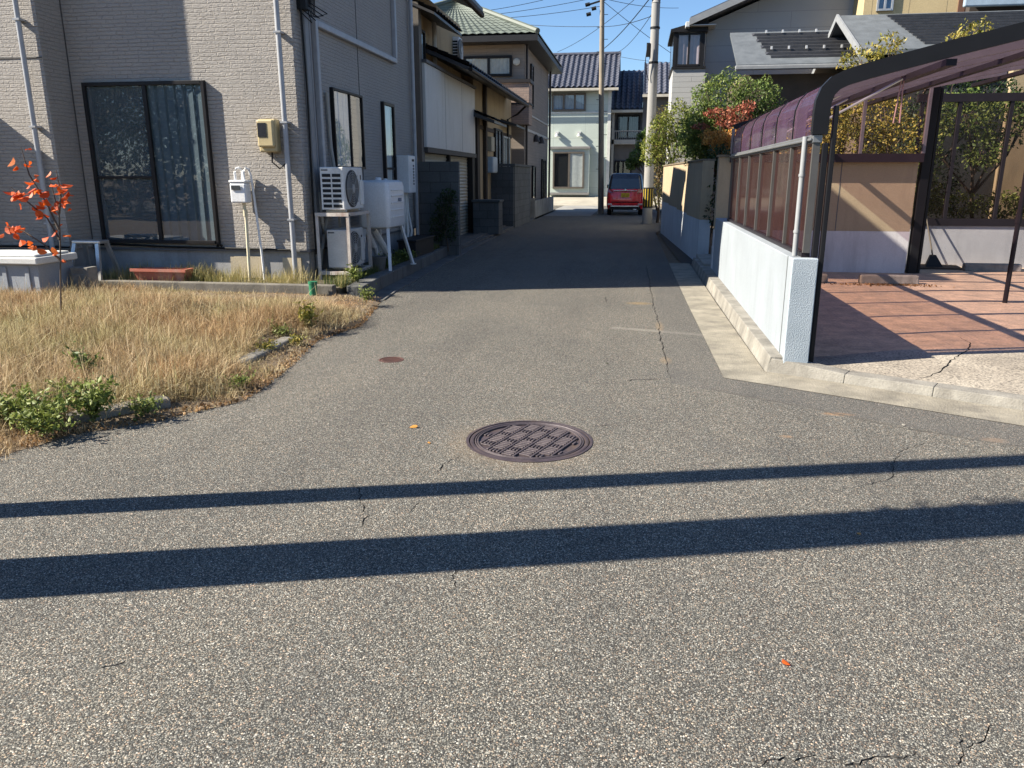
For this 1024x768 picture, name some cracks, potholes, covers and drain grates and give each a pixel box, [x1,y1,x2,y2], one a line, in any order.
crack [857,442,929,487]
manhole cover [466,420,593,463]
crack [915,338,971,380]
crack [758,752,916,768]
crack [957,725,993,768]
crack [352,483,370,529]
